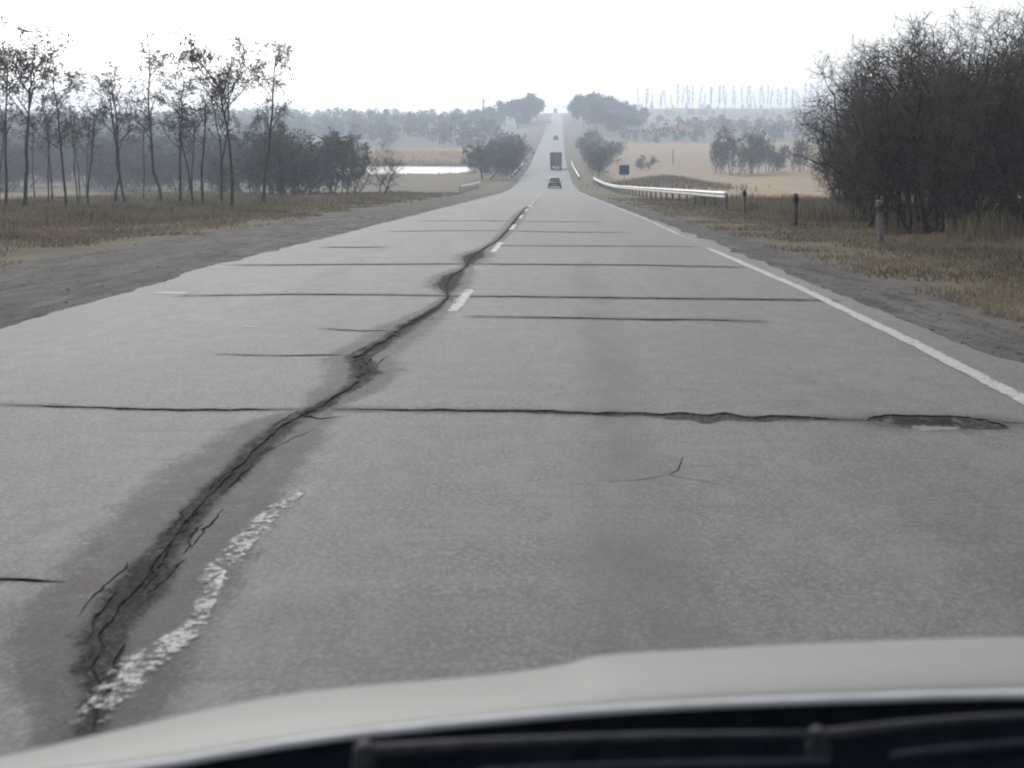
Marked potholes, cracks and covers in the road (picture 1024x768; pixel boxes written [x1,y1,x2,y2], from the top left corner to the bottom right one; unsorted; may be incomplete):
crack [0,208,845,732]
pothole [866,414,1008,431]
